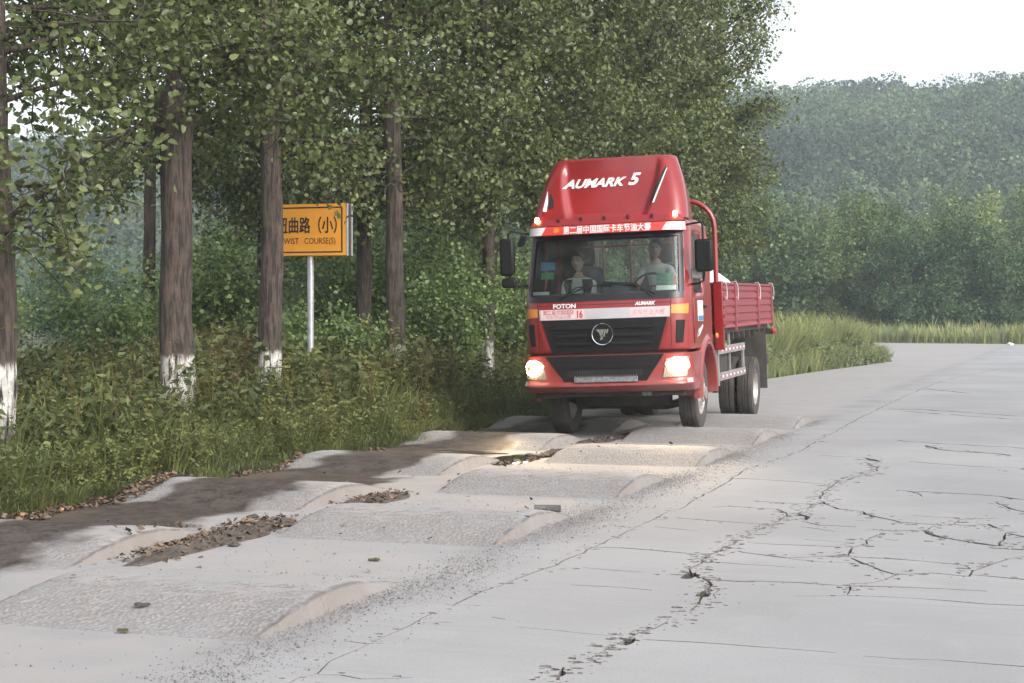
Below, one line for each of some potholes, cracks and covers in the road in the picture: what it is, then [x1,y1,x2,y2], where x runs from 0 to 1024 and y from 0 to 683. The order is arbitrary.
crack [521,441,1024,683]
